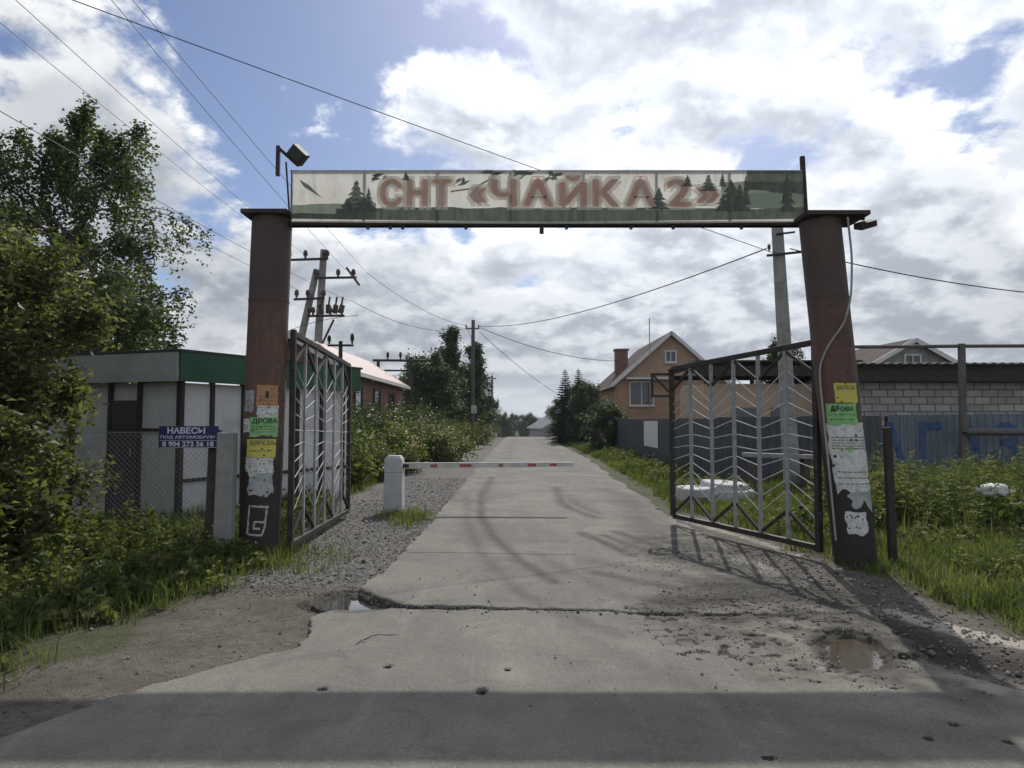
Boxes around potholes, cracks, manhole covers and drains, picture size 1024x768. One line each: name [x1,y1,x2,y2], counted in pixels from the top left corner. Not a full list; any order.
pothole [310,590,395,614]
pothole [812,630,895,670]
crack [358,589,920,690]
